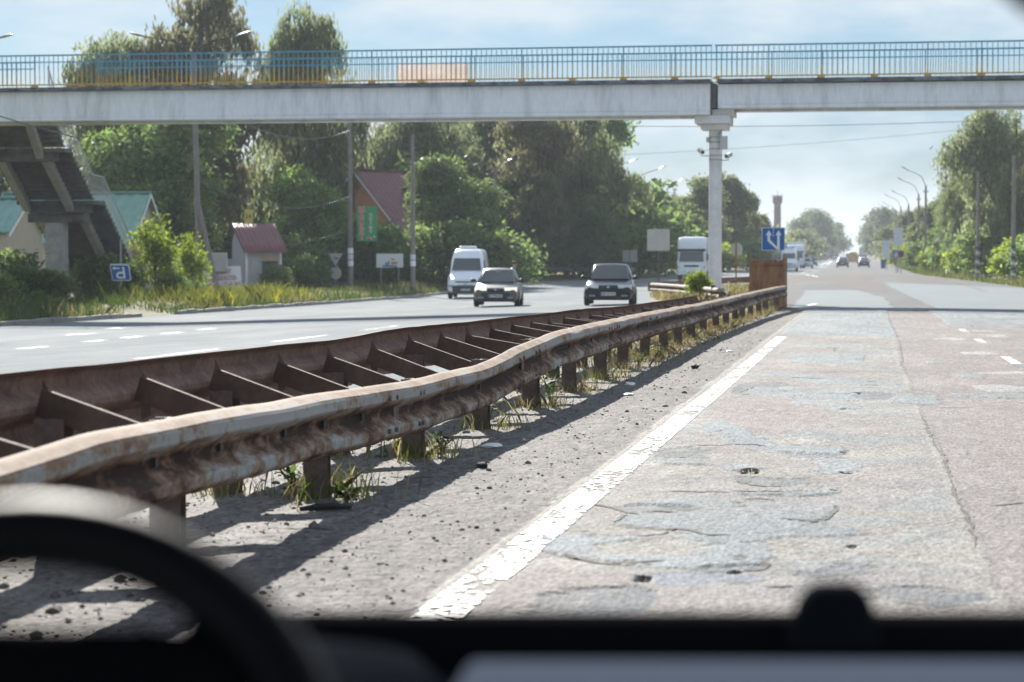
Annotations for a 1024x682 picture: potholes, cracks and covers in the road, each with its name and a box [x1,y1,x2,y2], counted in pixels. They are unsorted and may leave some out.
pothole [635,575,652,583]
